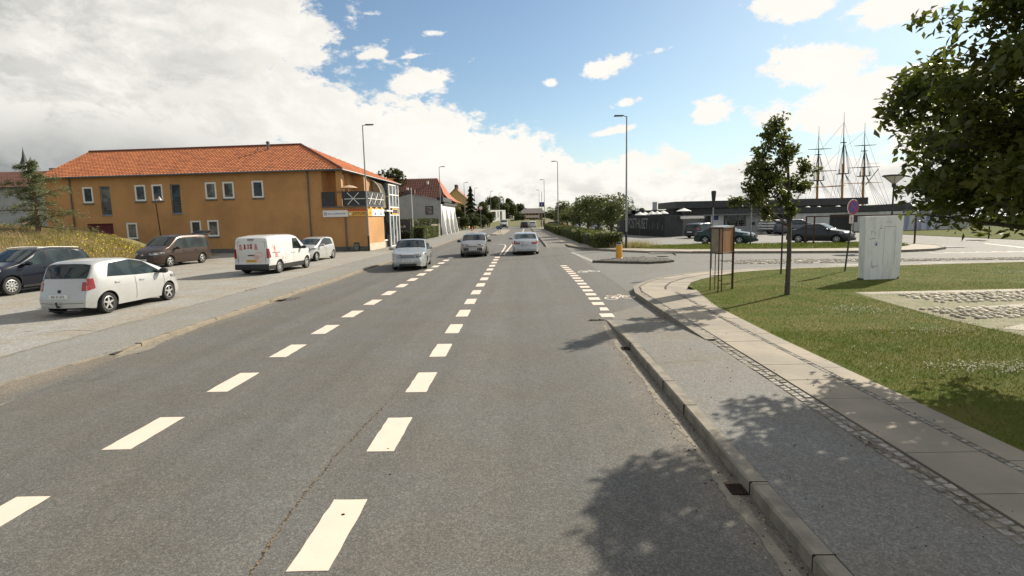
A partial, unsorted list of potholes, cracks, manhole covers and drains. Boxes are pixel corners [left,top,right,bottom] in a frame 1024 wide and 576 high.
drain grate [725,483,748,495]
